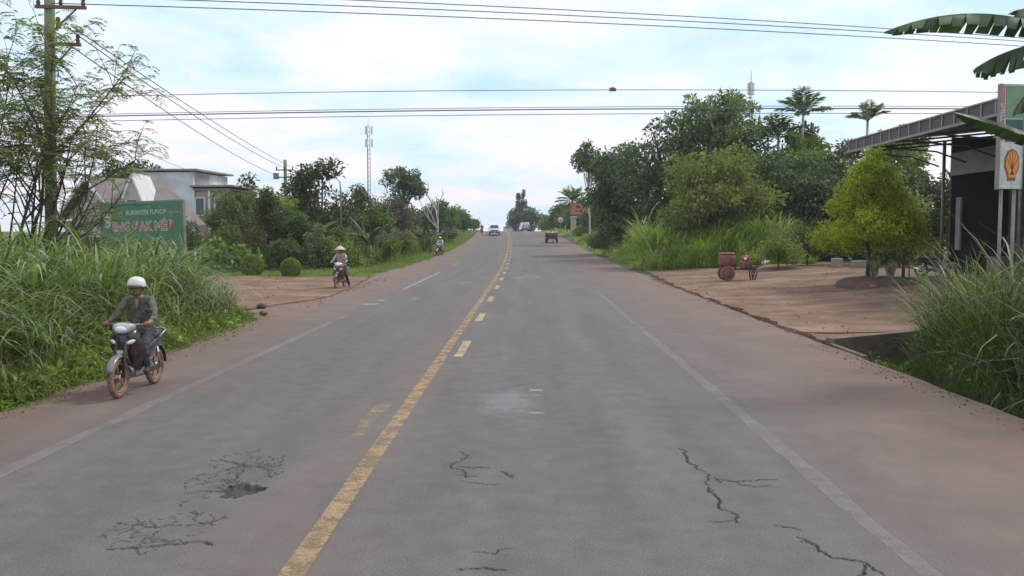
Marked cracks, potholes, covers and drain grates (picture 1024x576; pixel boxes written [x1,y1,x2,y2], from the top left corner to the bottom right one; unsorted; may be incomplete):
crack [678,448,778,523]
crack [97,448,285,555]
crack [459,549,505,571]
crack [449,452,516,485]
crack [776,525,885,576]
pothole [219,482,268,499]
